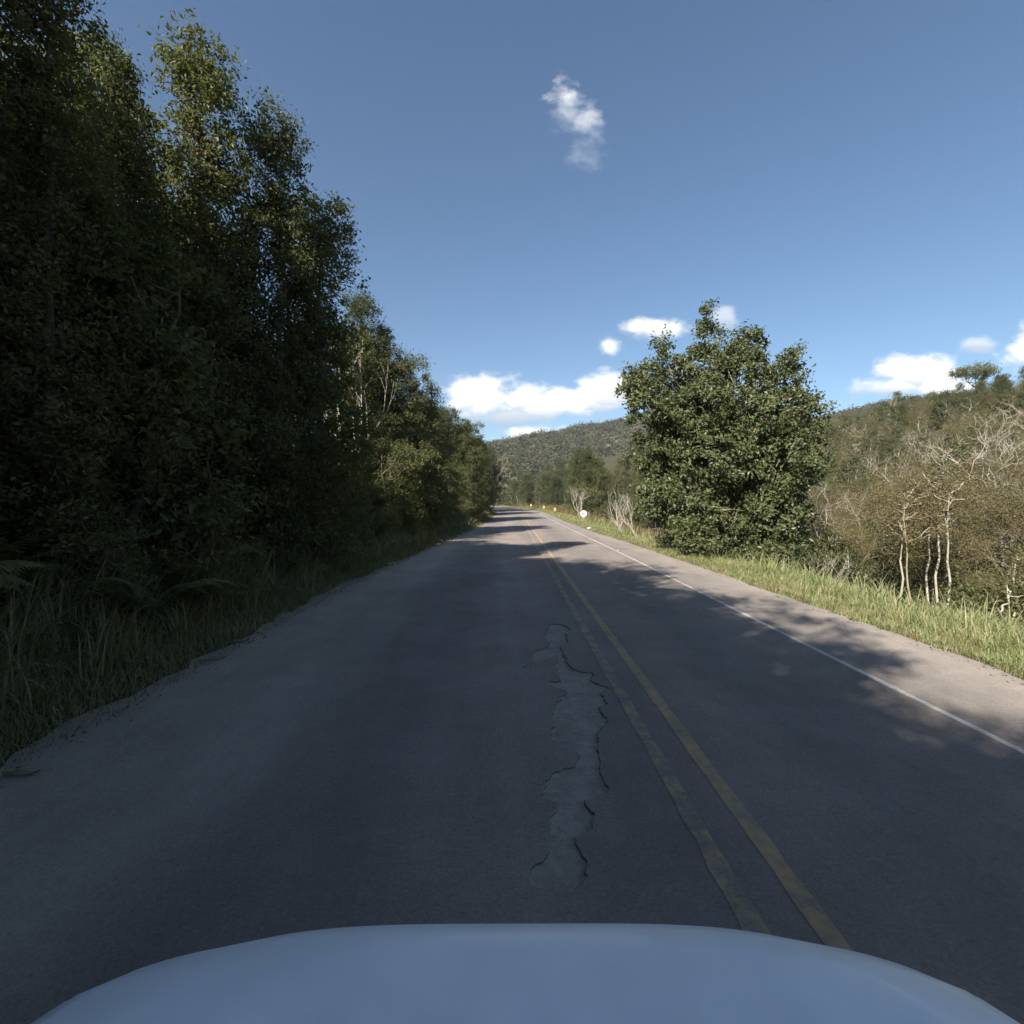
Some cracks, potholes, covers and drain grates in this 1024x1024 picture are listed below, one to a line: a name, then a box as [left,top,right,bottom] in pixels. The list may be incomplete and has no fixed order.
pothole [527,624,610,891]
